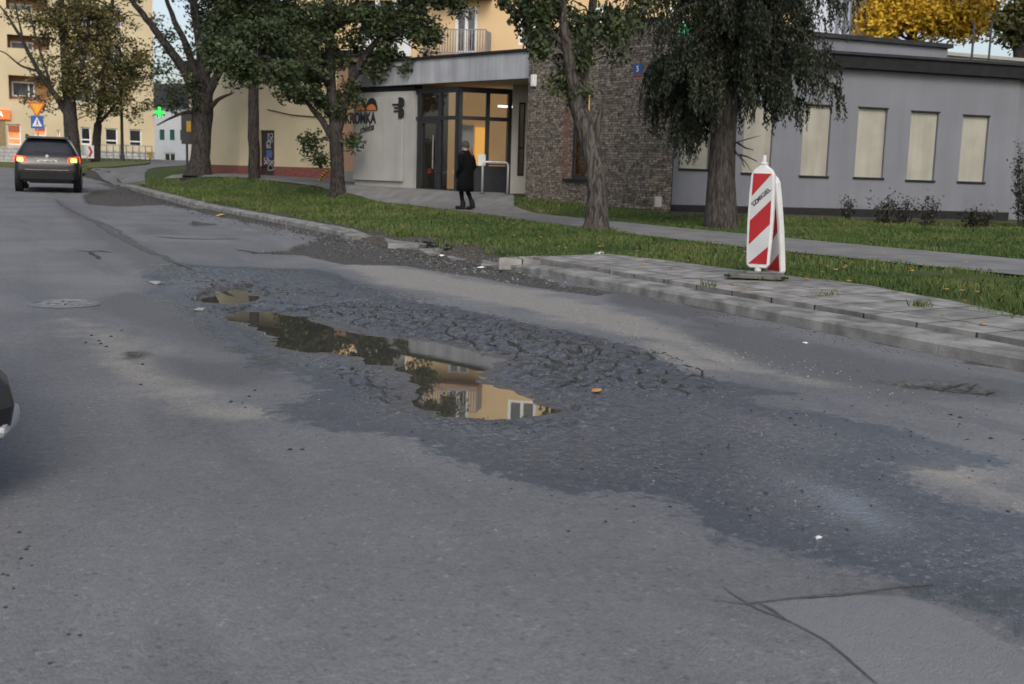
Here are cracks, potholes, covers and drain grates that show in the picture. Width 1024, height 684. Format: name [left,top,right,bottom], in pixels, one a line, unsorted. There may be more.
pothole [251,235,610,296]
pothole [189,283,276,313]
manhole cover [27,299,101,308]
crack [193,278,720,404]
pothole [201,300,583,428]
crack [77,250,107,259]
crack [916,383,993,395]
pothole [82,188,196,209]
